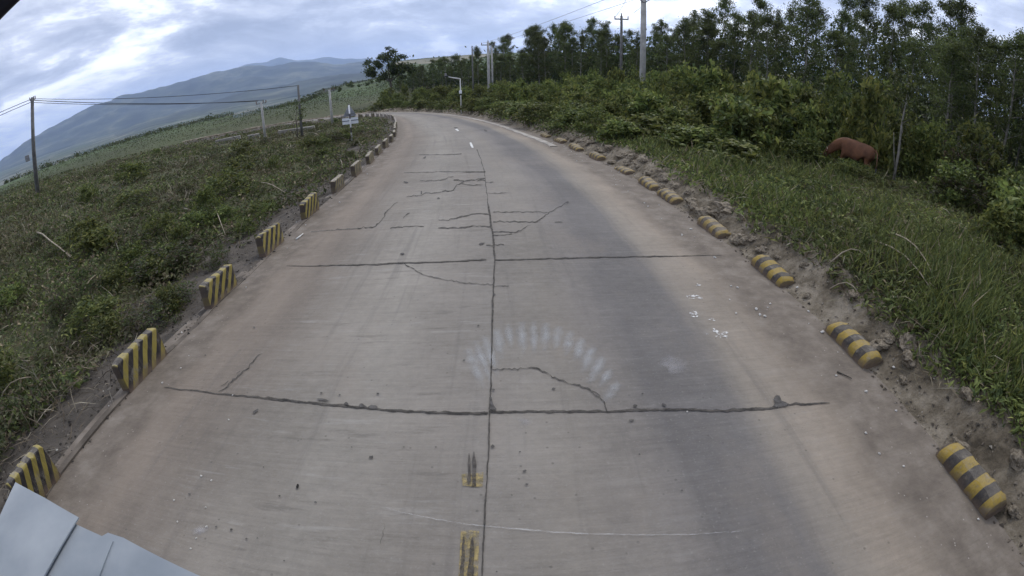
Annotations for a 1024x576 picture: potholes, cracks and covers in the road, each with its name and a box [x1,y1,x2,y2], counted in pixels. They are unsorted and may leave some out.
crack [492,367,607,411]
crack [218,354,260,392]
crack [311,176,569,246]
crack [404,263,507,286]
